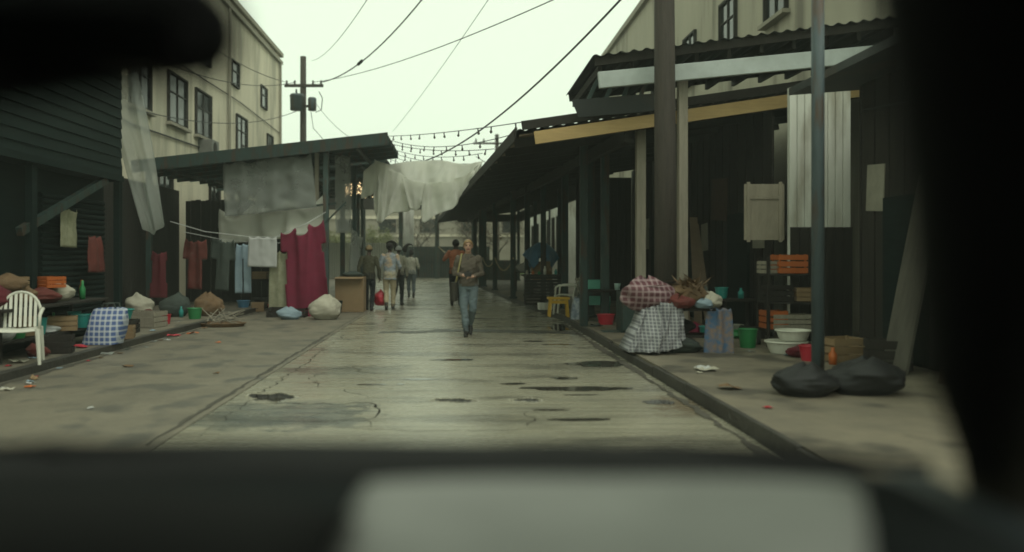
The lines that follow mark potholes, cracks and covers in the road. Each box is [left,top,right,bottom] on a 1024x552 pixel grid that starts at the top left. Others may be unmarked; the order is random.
pothole [244,392,300,404]
crack [209,318,564,431]
